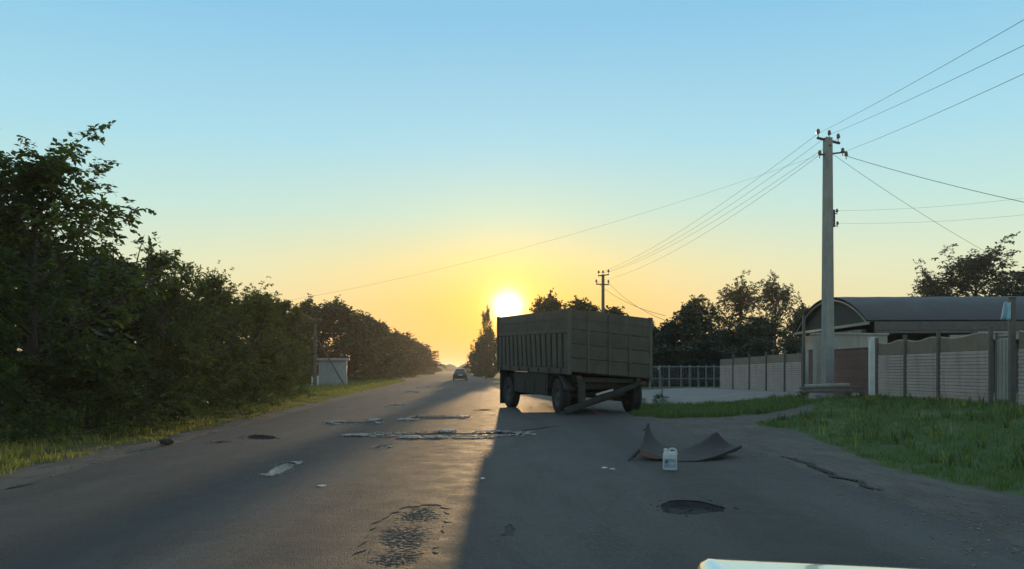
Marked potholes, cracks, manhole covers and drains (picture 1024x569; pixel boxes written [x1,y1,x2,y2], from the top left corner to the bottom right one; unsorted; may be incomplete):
pothole [258,461,303,476]
pothole [338,428,536,439]
pothole [650,500,738,517]
crack [781,456,885,490]
